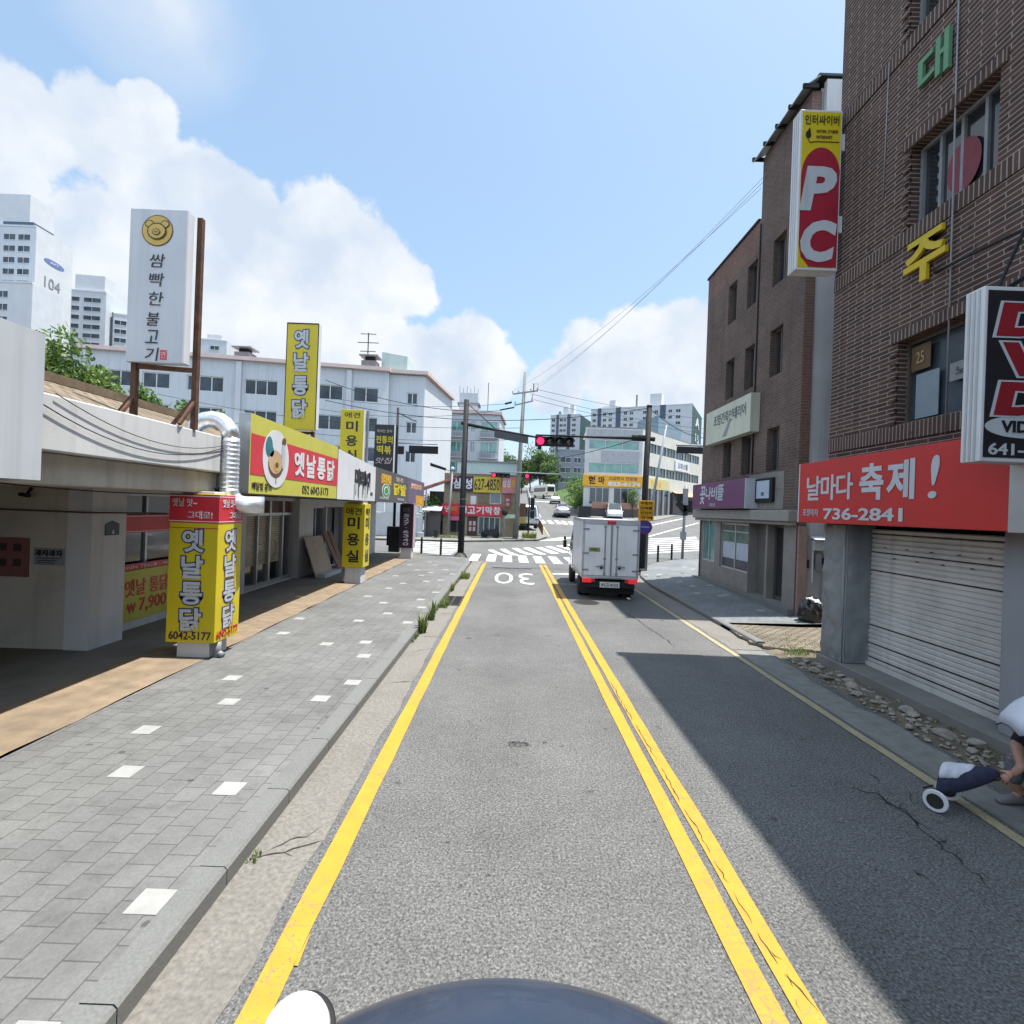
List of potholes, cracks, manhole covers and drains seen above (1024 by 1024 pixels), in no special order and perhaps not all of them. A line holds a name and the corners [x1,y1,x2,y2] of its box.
crack [836,771,996,893]
crack [248,828,321,862]
crack [611,683,818,1010]
pothole [507,740,530,749]
